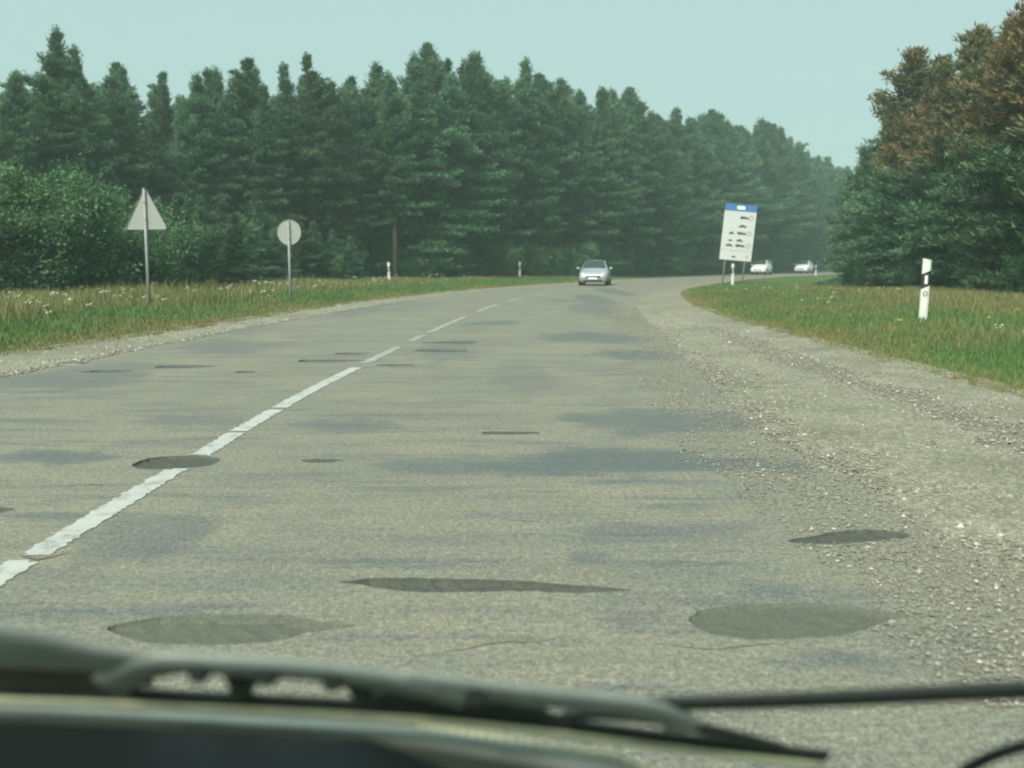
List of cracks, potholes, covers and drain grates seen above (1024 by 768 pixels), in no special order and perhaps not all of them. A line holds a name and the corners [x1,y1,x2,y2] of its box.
pothole [788,530,911,544]
crack [434,639,557,654]
pothole [107,613,358,645]
pothole [132,456,221,469]
pothole [342,577,632,593]
pothole [689,603,903,640]
